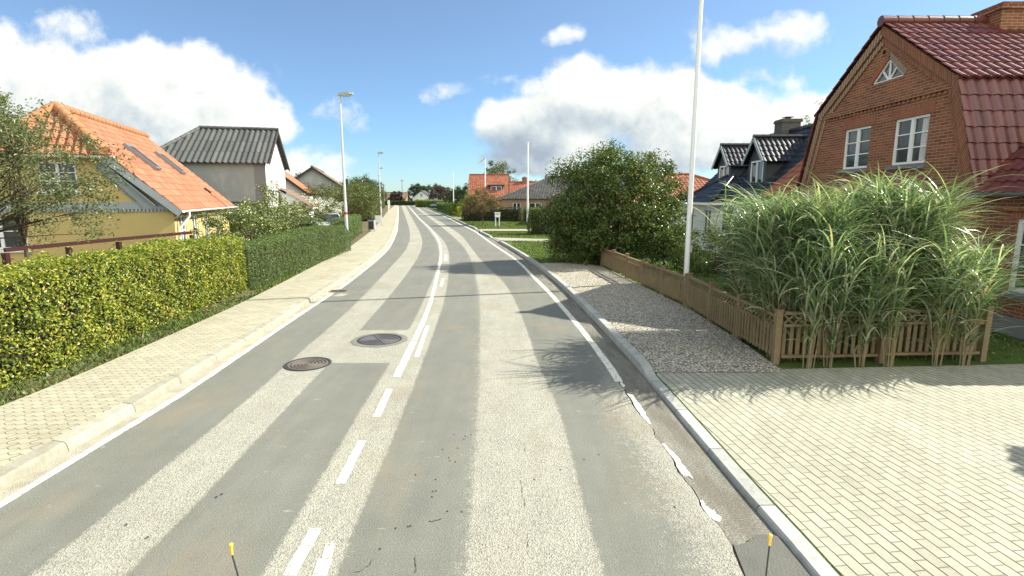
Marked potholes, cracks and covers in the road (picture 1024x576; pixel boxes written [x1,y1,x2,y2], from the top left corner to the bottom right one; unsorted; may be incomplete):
crack [619,382,744,575]
manhole cover [351,333,408,348]
manhole cover [284,357,332,371]
